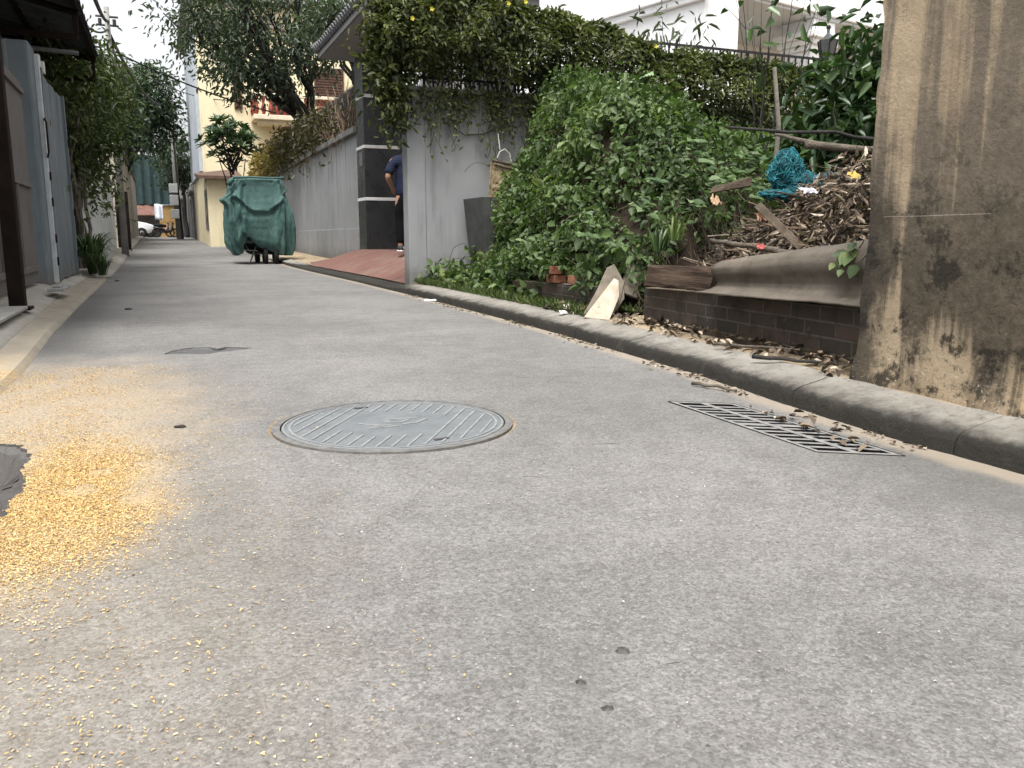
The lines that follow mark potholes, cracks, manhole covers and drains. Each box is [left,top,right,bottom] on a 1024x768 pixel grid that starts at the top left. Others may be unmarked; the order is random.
manhole cover [268,399,516,455]
drain grate [668,401,906,457]
pothole [0,444,33,519]
